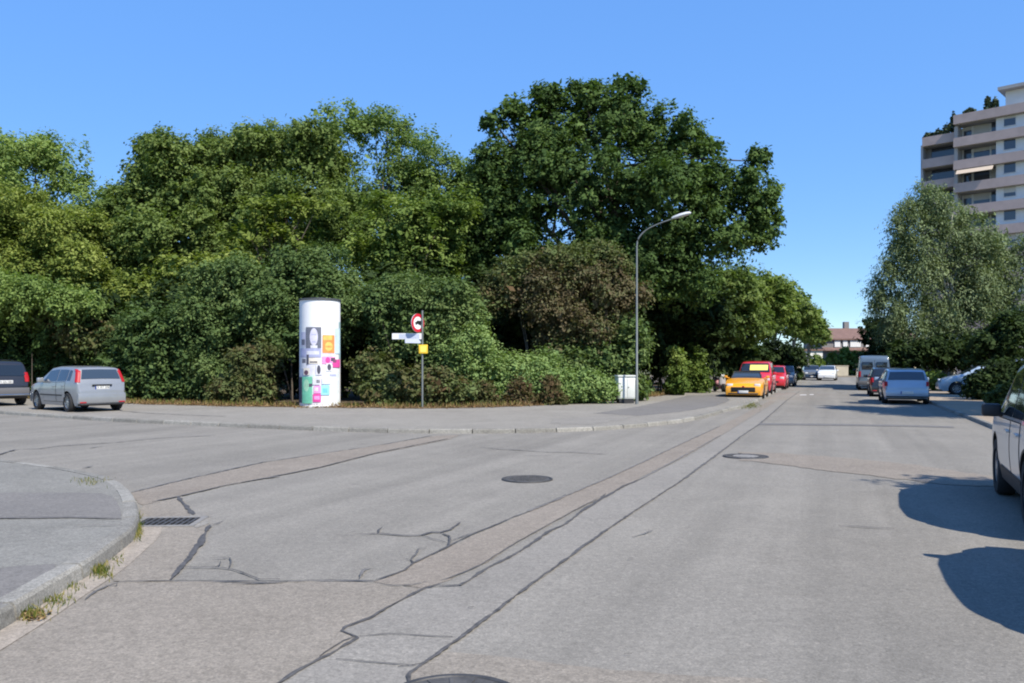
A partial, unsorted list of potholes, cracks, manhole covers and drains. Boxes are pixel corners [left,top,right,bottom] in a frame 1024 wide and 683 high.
manhole cover [502,475,553,483]
crack [183,557,280,579]
manhole cover [404,673,509,683]
